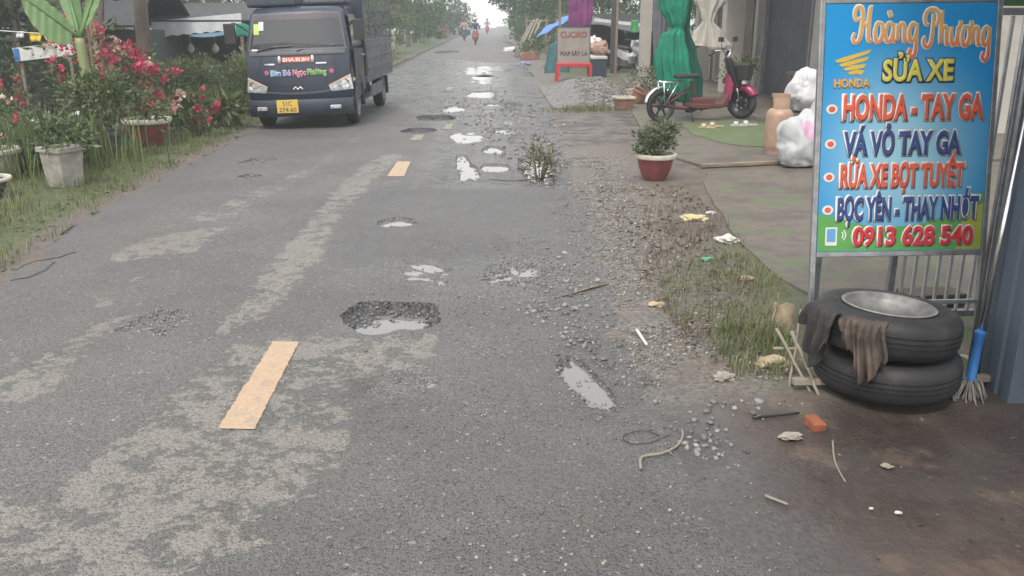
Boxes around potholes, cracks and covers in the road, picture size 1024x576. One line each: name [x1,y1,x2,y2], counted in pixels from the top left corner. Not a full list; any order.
pothole [556,353,618,415]
pothole [383,259,454,290]
pothole [481,145,505,154]
pothole [438,105,468,113]
crack [10,252,75,281]
pothole [377,217,418,227]
pothole [113,307,194,337]
pothole [455,154,482,182]
pothole [339,301,441,335]
pothole [476,255,565,293]
pothole [517,151,562,187]
pothole [479,163,511,172]
